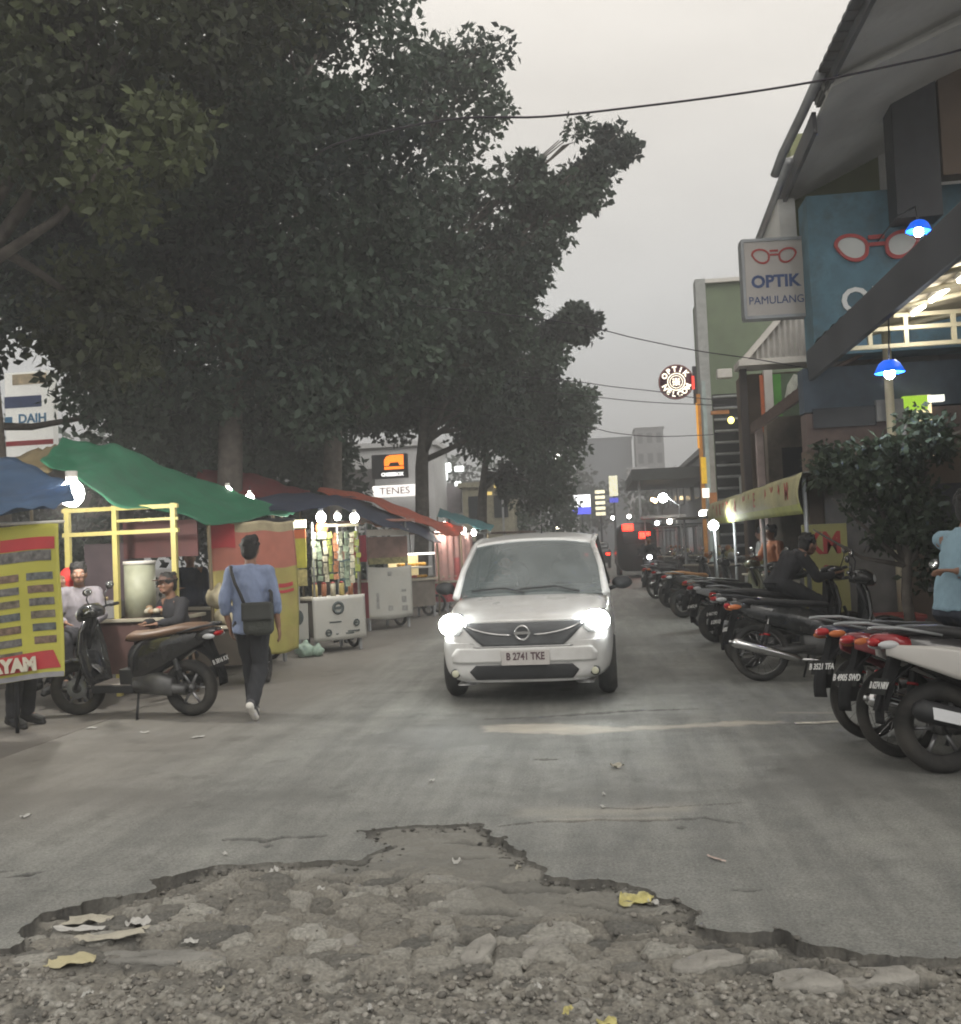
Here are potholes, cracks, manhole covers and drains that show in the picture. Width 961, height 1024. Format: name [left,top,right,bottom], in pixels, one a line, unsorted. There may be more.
pothole [0,823,961,1024]
crack [222,835,324,843]
crack [501,803,735,827]
